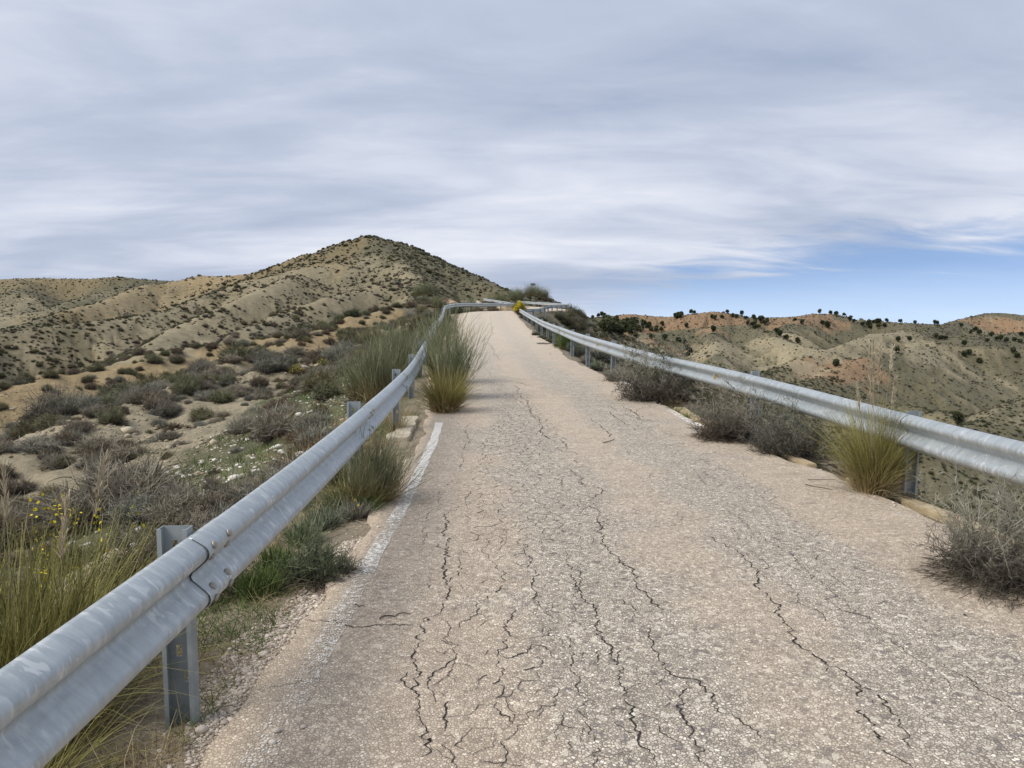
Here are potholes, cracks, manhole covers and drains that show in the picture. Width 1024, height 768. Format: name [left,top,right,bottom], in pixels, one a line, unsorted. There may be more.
crack [591,402,1022,768]
crack [296,382,761,768]
